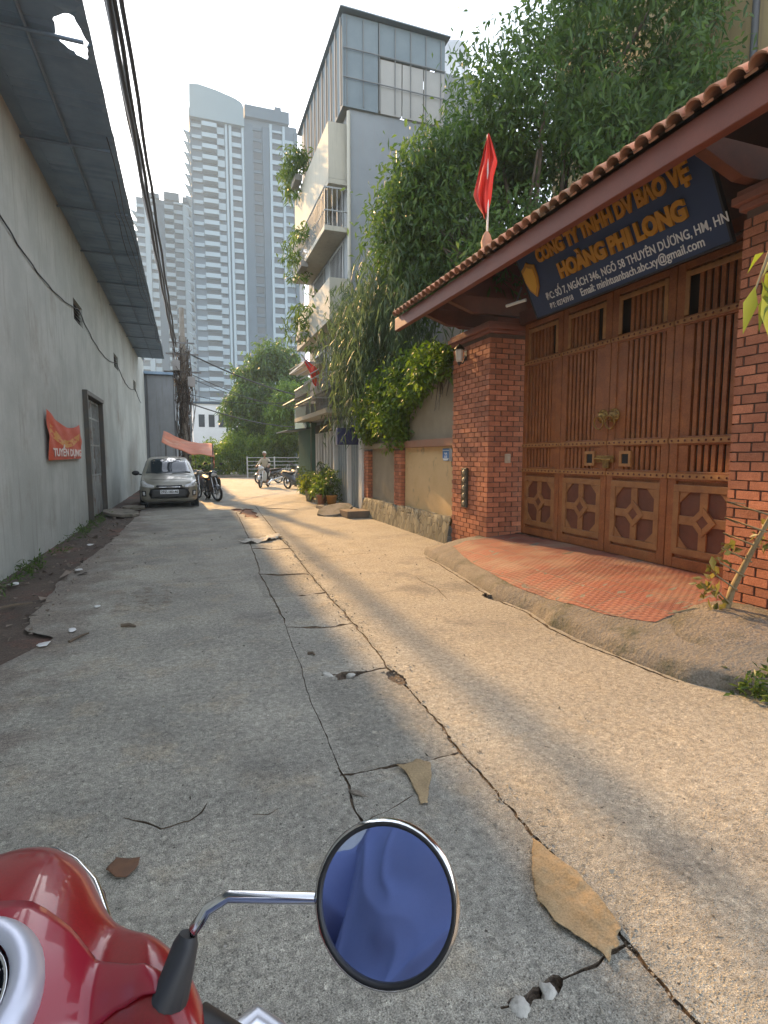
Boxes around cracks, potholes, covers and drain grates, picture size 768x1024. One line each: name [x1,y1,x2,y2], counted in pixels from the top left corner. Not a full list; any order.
pothole [232,508,258,518]
pothole [386,670,407,686]
pothole [507,974,563,1008]
crack [125,803,207,830]
pothole [335,671,368,680]
crack [500,942,631,1009]
